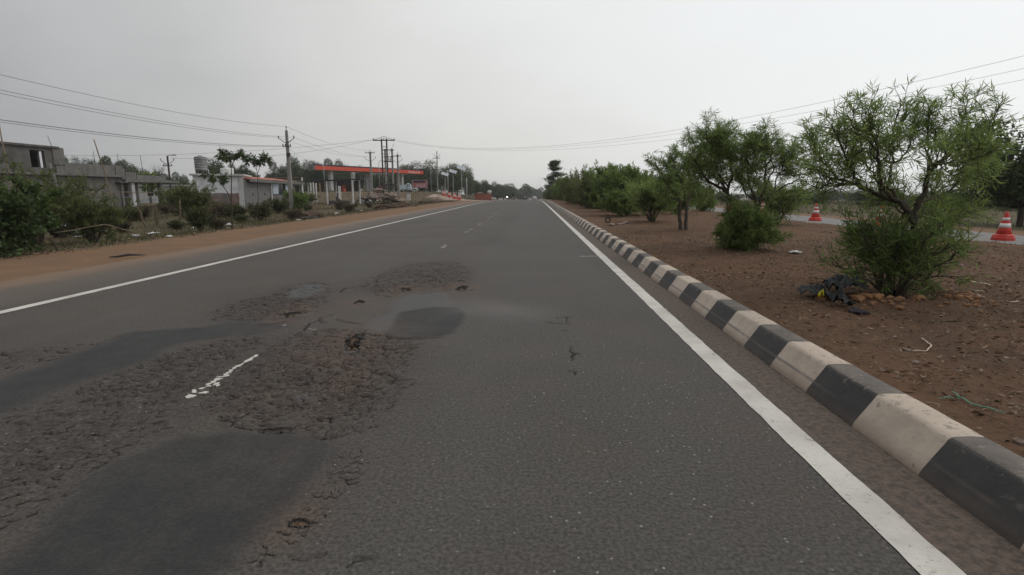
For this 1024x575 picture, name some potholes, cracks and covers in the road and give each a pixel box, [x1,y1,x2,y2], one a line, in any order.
pothole [341,333,366,353]
crack [366,263,469,296]
crack [210,283,345,336]
crack [0,338,259,529]
crack [248,449,363,569]
crack [197,329,414,440]
pothole [288,518,313,528]
